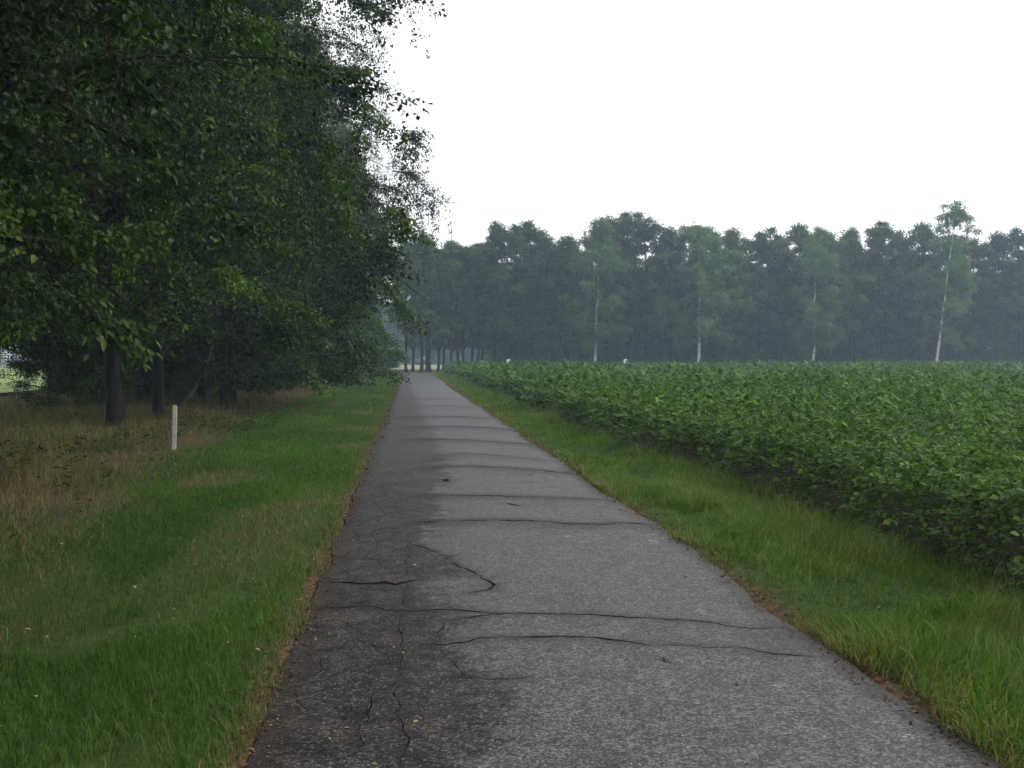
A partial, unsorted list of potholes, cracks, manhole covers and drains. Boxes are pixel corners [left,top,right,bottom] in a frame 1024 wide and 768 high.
crack [432,398,564,473]
crack [283,483,811,768]
